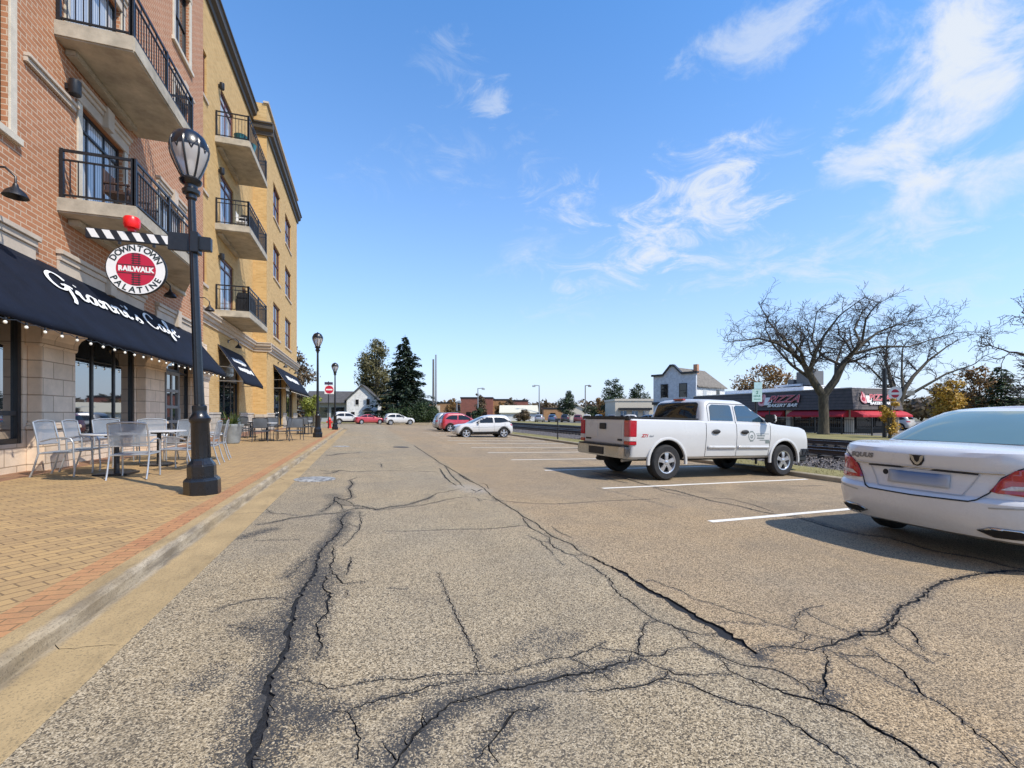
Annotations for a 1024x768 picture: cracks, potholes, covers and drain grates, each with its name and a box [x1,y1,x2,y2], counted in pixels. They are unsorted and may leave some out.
crack [212,446,1024,768]
